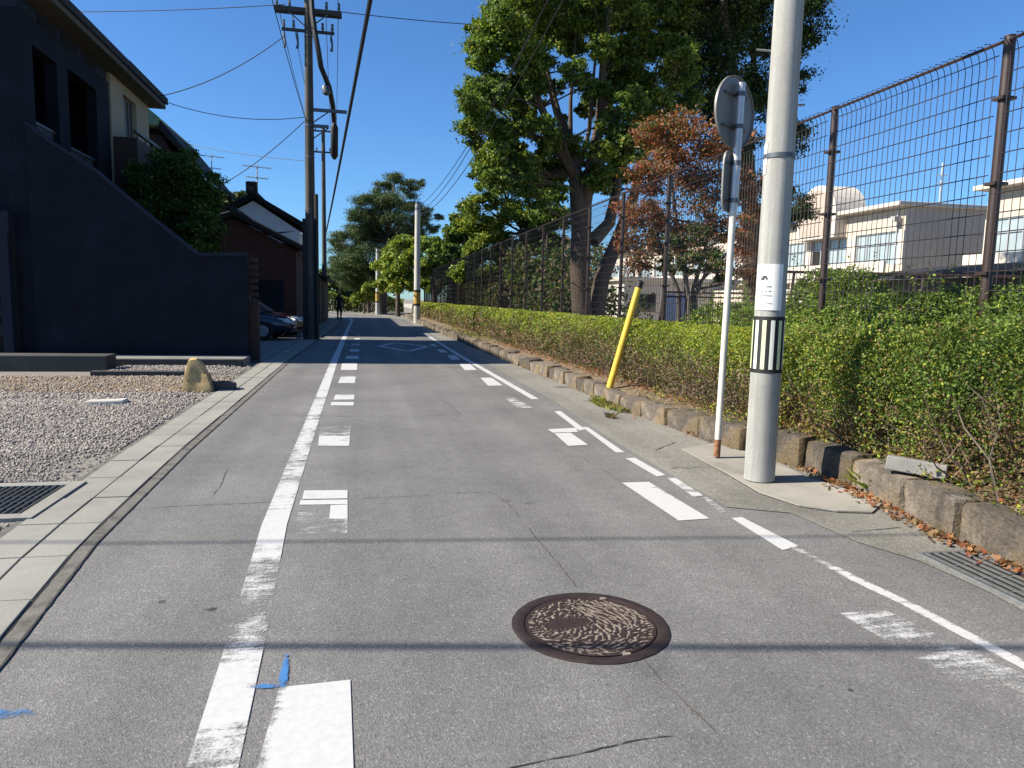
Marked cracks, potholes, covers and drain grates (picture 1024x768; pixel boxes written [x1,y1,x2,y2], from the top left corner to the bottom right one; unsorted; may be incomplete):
crack [508,662,716,768]
drain grate [916,550,1024,607]
manhole cover [512,593,671,665]
drain grate [0,481,87,523]
